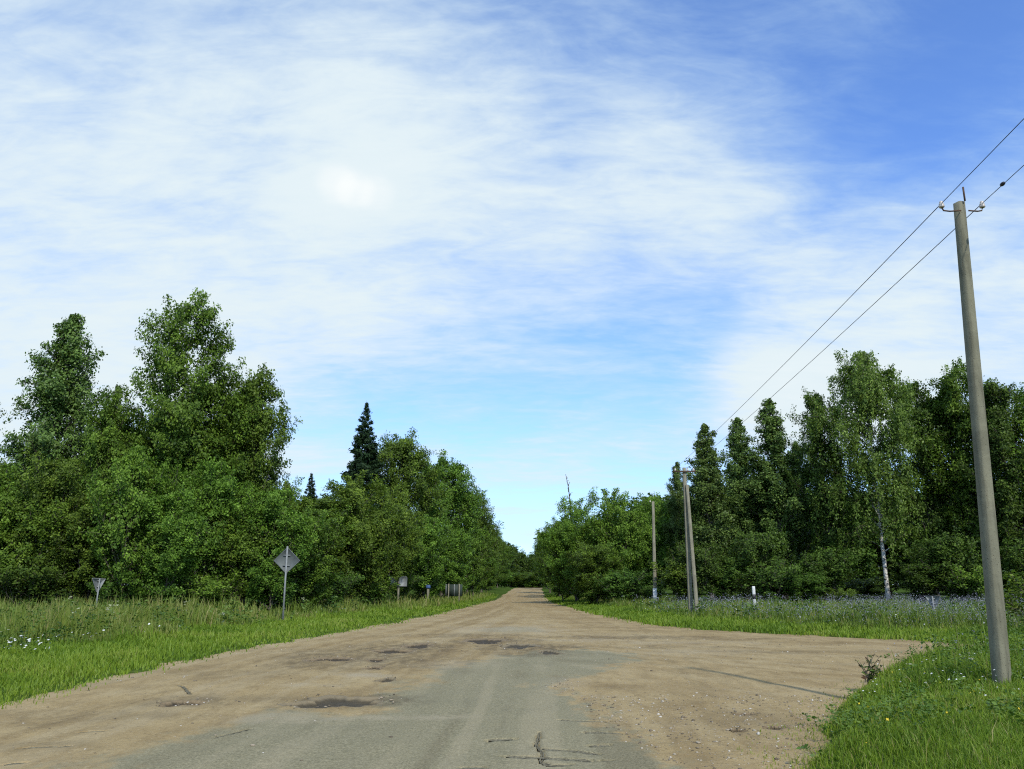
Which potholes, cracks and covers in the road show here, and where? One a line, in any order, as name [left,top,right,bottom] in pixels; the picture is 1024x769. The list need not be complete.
crack [488,720,621,767]
pothole [277,695,386,709]
